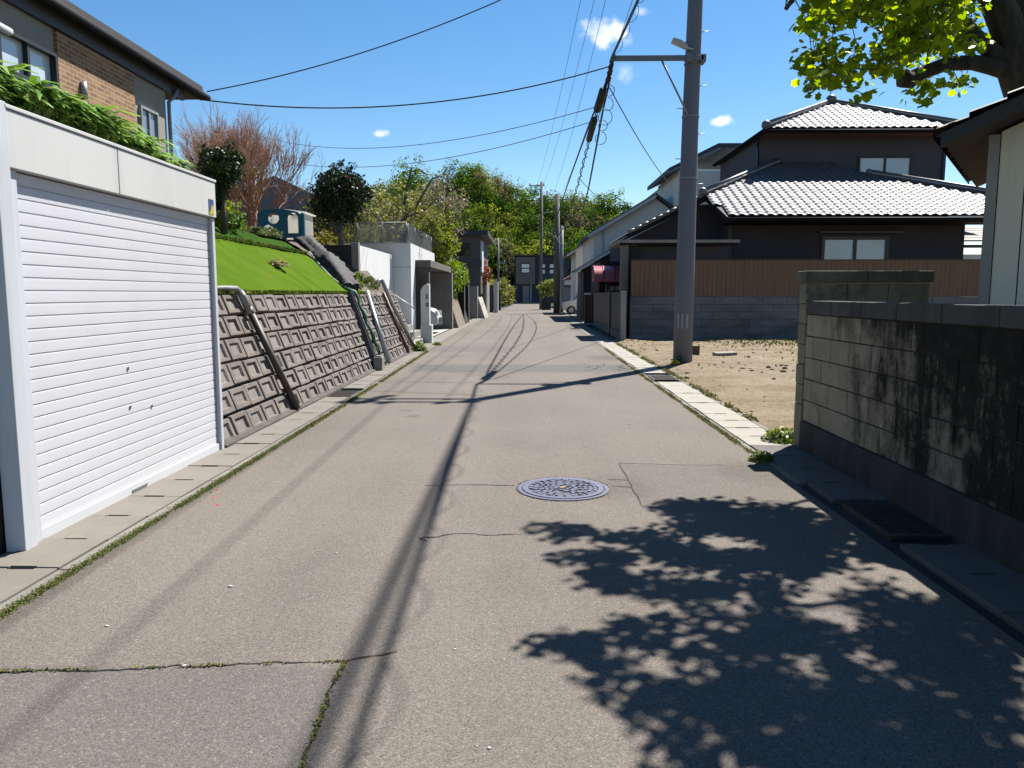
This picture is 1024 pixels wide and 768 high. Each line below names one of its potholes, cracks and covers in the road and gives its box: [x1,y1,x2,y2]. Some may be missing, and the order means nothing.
crack [0,651,397,768]
drain grate [841,503,952,542]
crack [418,533,505,541]
manhole cover [516,477,611,501]
